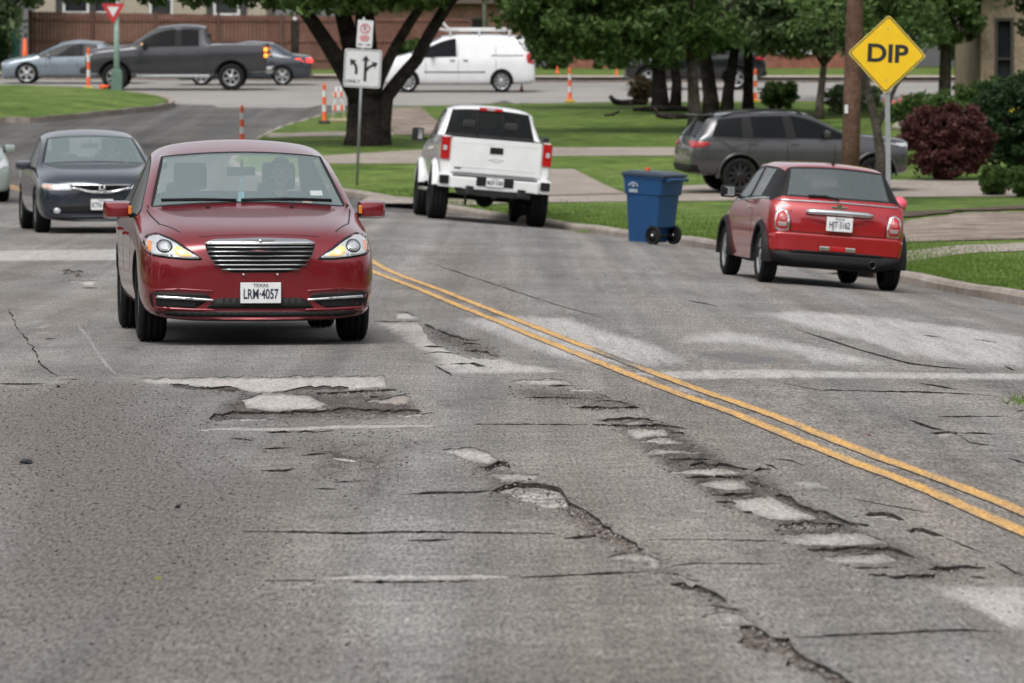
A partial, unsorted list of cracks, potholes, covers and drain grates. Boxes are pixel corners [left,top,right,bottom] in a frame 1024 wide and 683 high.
crack [941,410,1024,446]
pothole [773,520,850,532]
crack [0,312,77,385]
pothole [209,407,421,421]
pothole [316,389,397,399]
pothole [480,460,511,472]
pothole [491,482,570,509]
crack [784,329,999,397]
